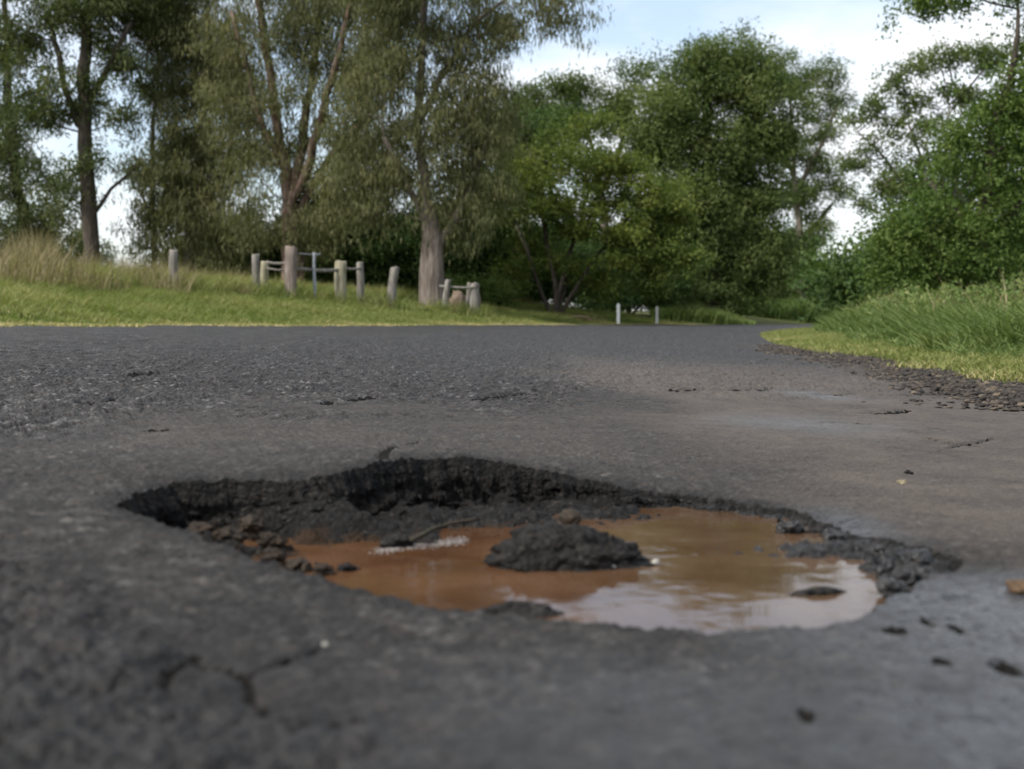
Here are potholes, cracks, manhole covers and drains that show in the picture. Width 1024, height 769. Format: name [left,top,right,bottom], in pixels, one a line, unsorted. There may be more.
crack [137,650,356,729]
pothole [881,625,909,635]
crack [834,391,948,424]
pothole [115,456,964,612]
